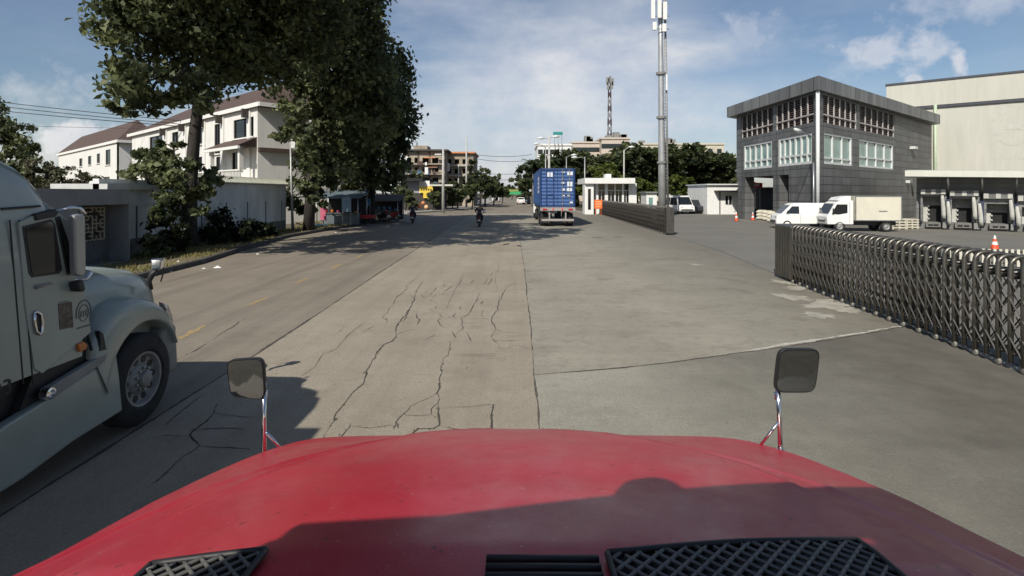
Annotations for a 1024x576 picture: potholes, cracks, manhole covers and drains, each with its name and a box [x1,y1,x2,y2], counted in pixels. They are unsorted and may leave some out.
crack [154,397,248,483]
crack [303,263,526,438]
